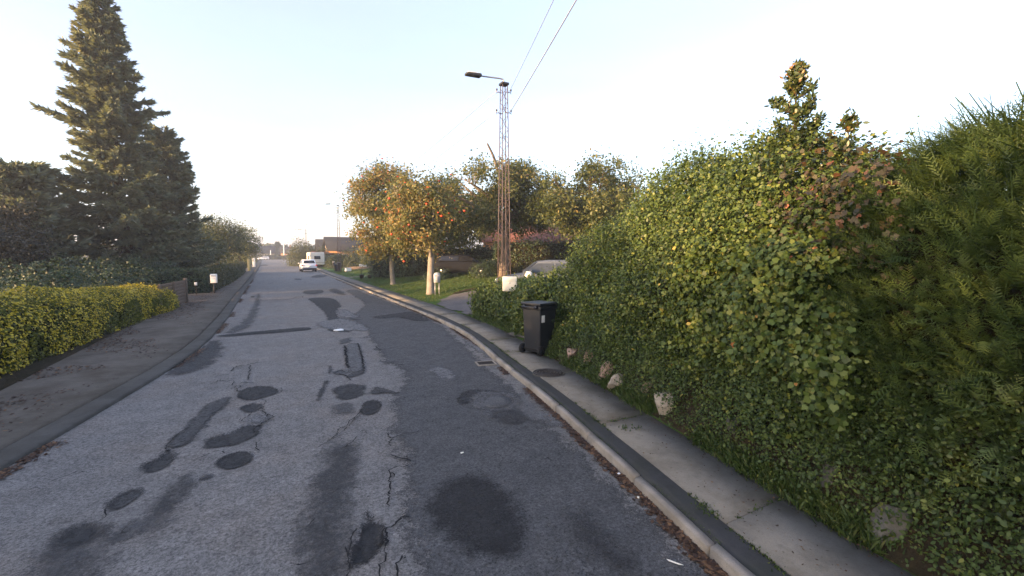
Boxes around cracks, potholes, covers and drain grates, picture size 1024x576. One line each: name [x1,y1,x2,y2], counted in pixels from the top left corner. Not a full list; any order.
crack [378,431,418,576]
pothole [349,511,386,566]
manhole cover [533,368,565,377]
